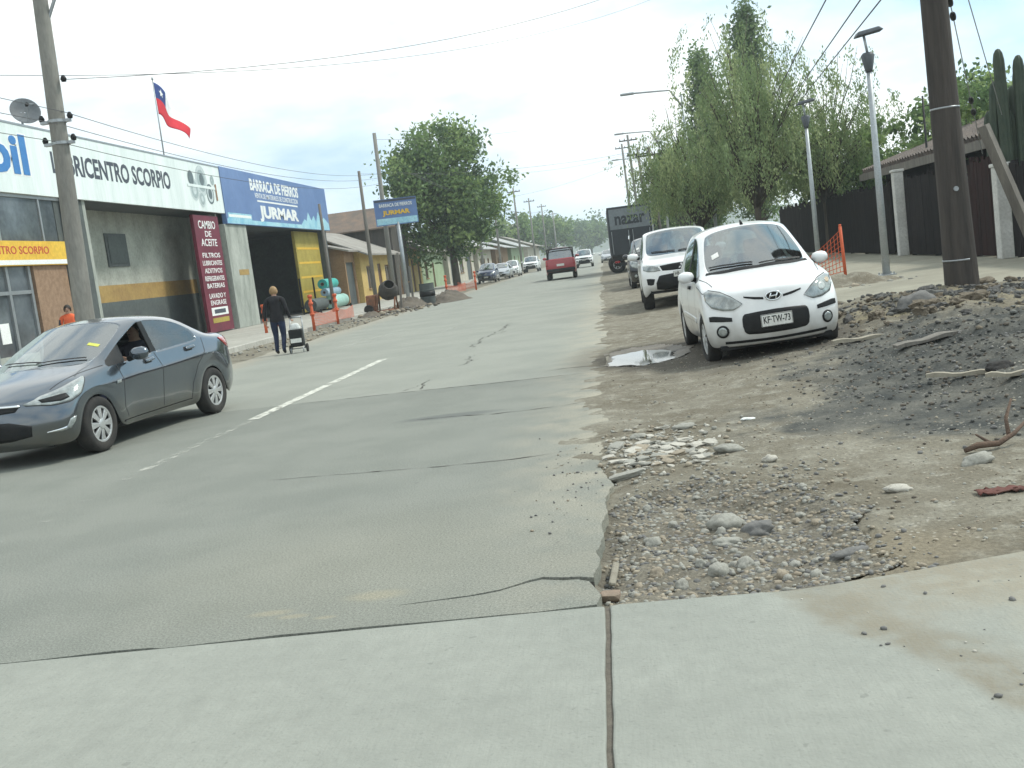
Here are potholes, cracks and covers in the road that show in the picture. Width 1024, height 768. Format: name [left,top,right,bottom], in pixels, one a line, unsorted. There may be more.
pothole [600,344,694,367]
crack [276,449,580,480]
crack [307,366,584,403]
